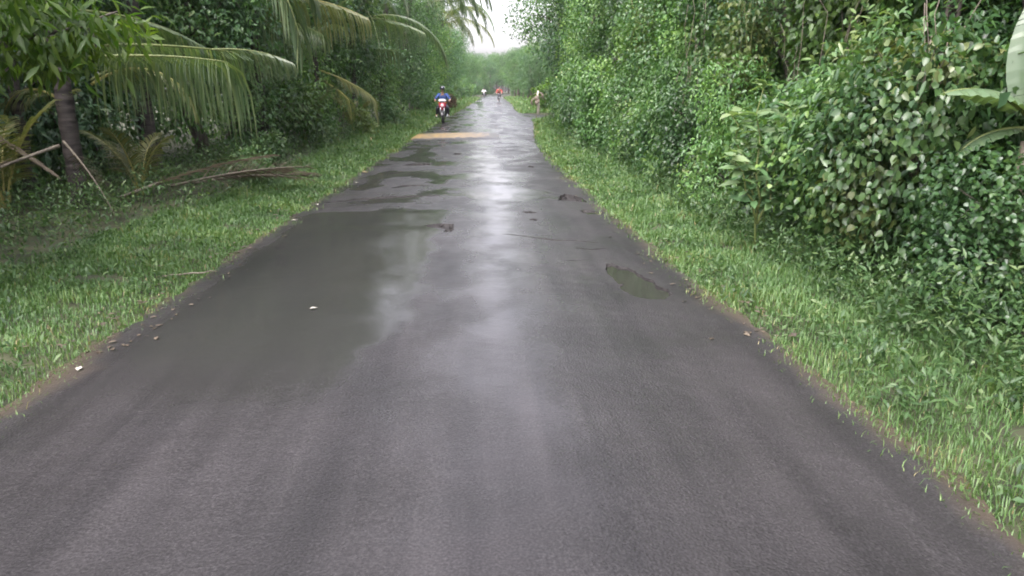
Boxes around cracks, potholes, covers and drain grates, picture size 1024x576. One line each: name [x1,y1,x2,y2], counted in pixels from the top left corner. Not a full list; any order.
pothole [425,223,454,232]
pothole [606,263,673,300]
crack [507,234,606,261]
pothole [558,194,587,202]
